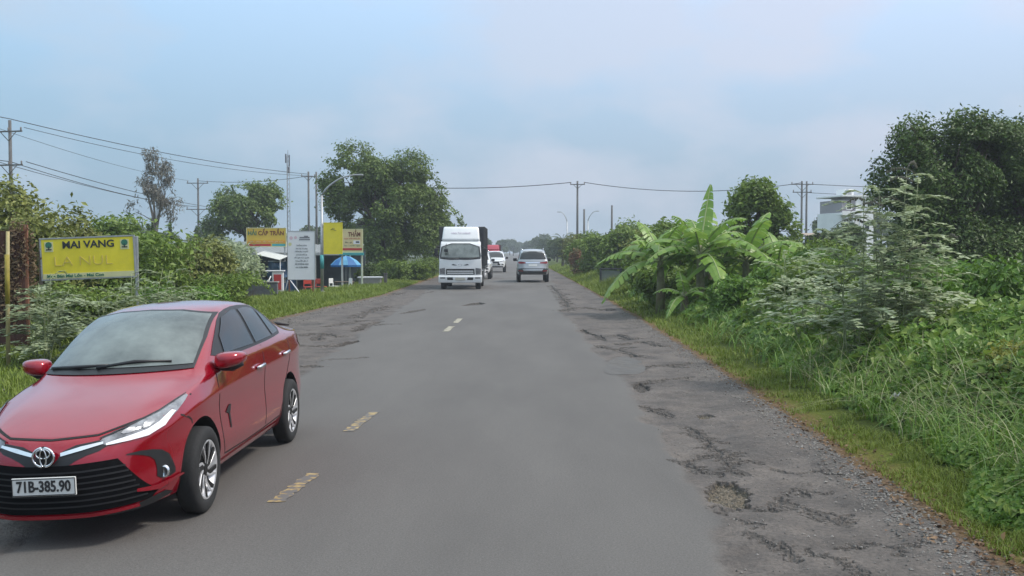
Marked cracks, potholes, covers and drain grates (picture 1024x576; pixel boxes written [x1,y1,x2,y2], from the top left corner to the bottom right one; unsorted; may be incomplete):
crack [591,334,699,385]
crack [636,405,937,576]
pothole [698,479,757,511]
pothole [630,381,655,393]
crack [545,285,621,312]
crack [297,292,409,369]
